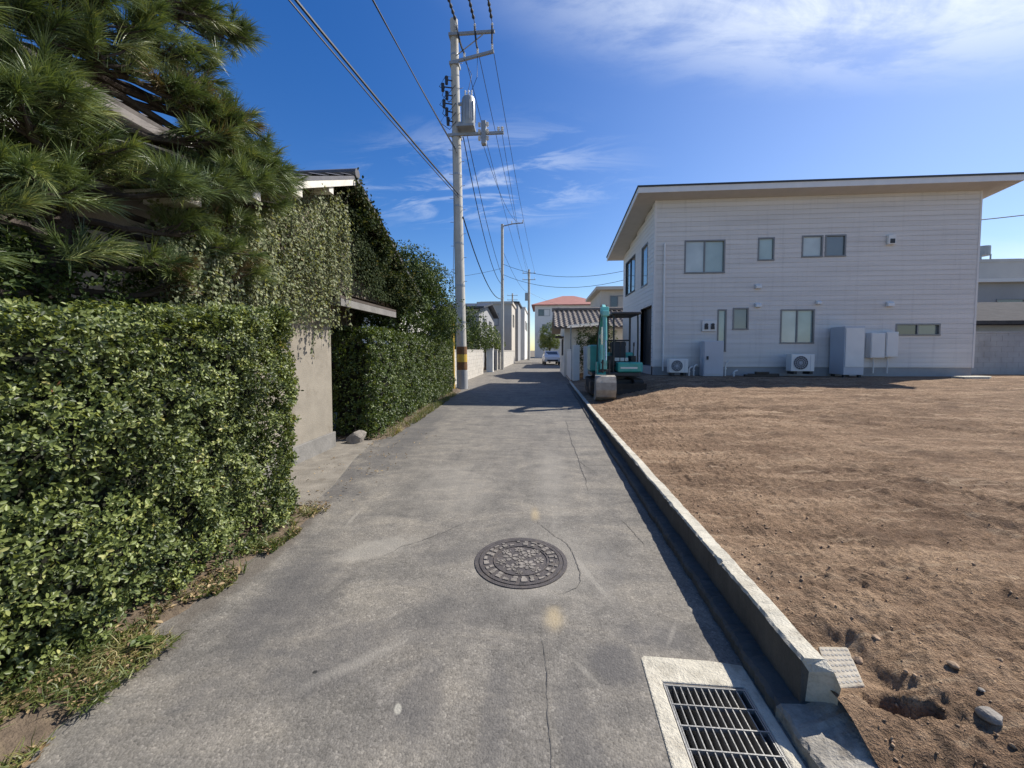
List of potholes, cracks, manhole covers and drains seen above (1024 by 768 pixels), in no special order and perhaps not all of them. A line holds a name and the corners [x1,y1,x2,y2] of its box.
crack [541,635,552,768]
drain grate [641,656,806,768]
manhole cover [475,538,567,589]
